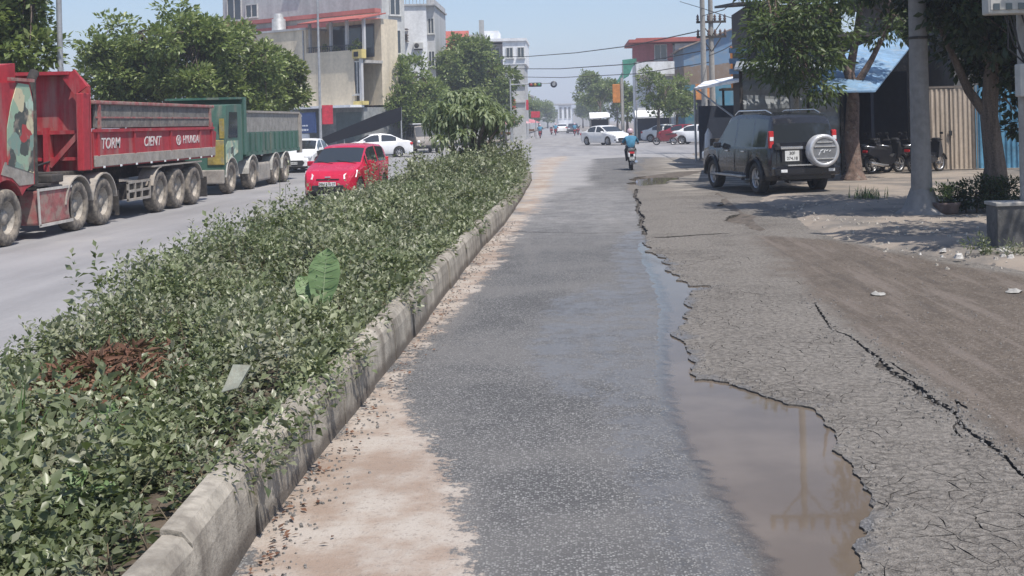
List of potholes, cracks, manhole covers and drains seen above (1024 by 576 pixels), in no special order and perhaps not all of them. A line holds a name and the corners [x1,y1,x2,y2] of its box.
crack [632,189,801,289]
pothole [624,232,874,576]
crack [680,290,1024,576]
